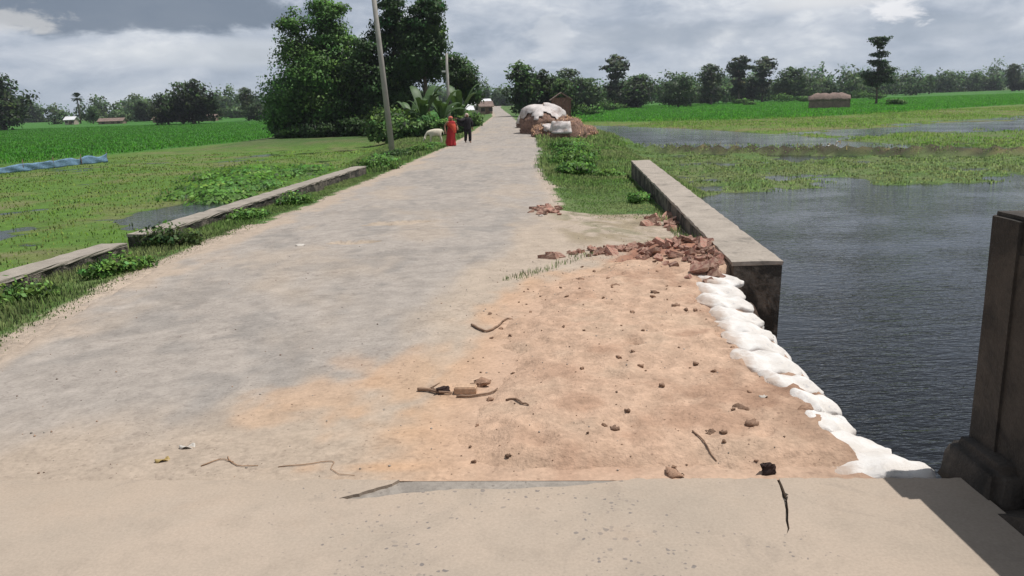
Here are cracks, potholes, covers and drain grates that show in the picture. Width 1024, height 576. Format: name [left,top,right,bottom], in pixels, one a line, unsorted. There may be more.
crack [779,484,789,533]
